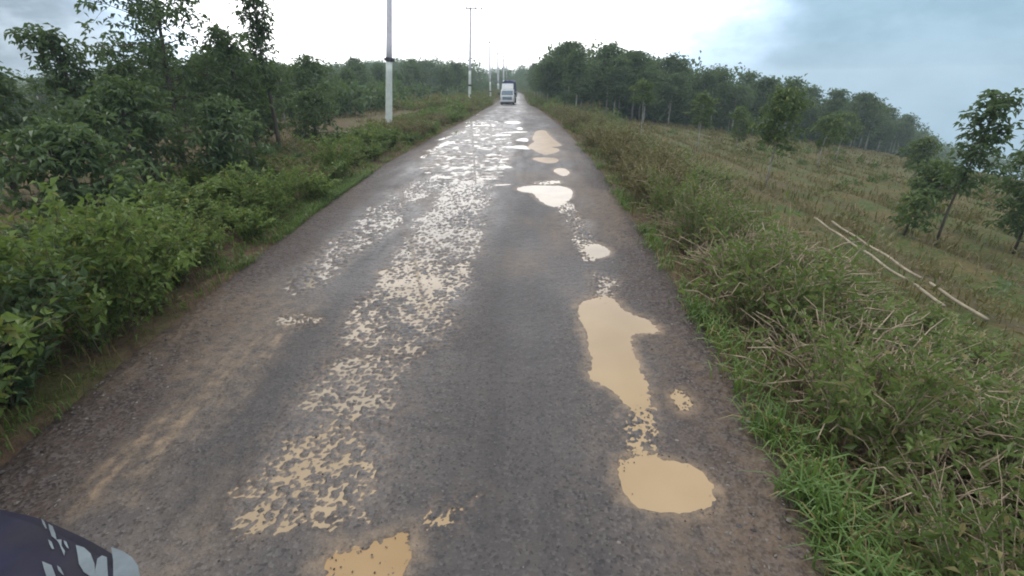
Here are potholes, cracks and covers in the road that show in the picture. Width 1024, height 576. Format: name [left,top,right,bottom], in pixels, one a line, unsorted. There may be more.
pothole [514,184,576,207]
pothole [551,167,572,176]
pothole [611,451,724,519]
pothole [665,385,699,415]
pothole [573,294,668,411]
pothole [527,130,563,155]
pothole [582,242,615,259]
pothole [315,520,422,576]
